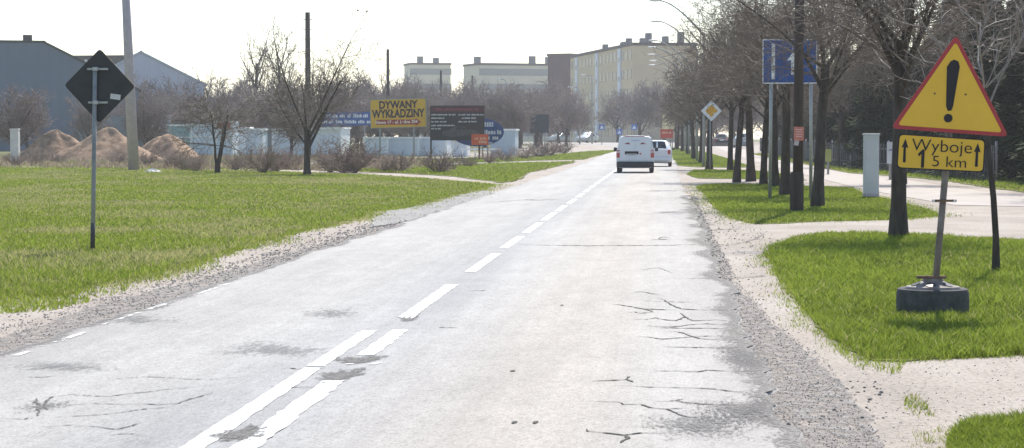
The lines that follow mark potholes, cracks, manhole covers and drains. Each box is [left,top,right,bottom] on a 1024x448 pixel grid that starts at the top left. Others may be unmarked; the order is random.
crack [518,237,694,246]
crack [617,291,727,348]
pothole [331,355,386,364]
pothole [315,367,365,383]
crack [15,376,232,436]
crack [597,370,757,420]
pothole [209,424,267,442]
crack [586,428,647,442]
